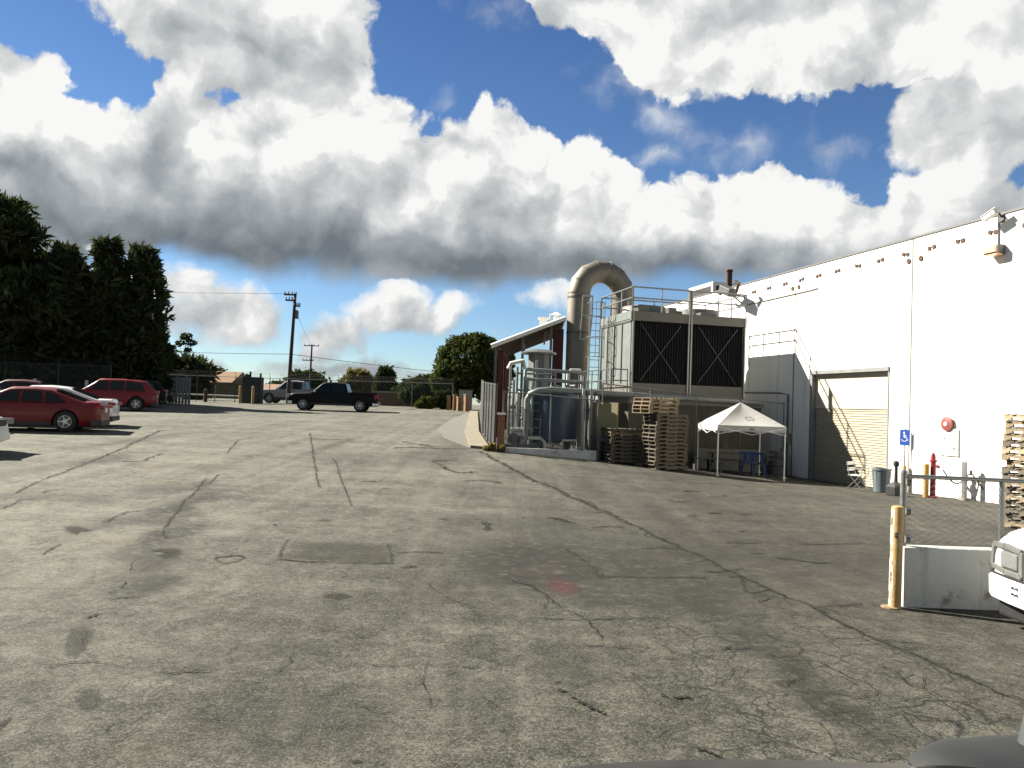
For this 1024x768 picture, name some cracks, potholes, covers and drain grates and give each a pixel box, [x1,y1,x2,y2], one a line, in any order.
crack [513,579,976,755]
crack [566,514,890,644]
